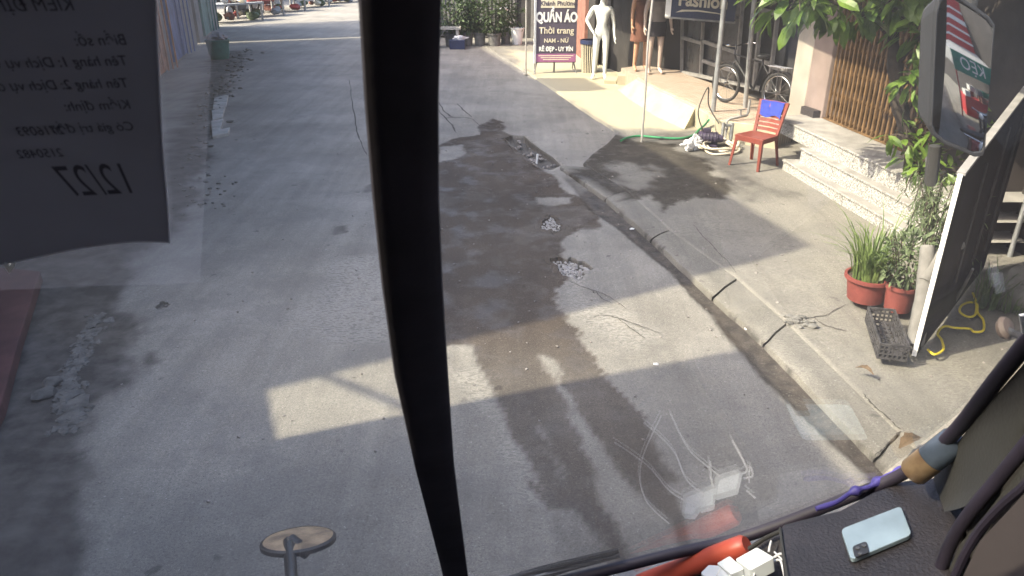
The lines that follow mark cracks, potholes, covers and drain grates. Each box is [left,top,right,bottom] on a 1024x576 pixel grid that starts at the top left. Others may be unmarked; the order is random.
crack [570,281,656,338]
pothole [535,214,569,235]
pothole [503,134,562,171]
pothole [544,255,600,284]
crack [439,103,482,132]
crack [349,81,367,155]
